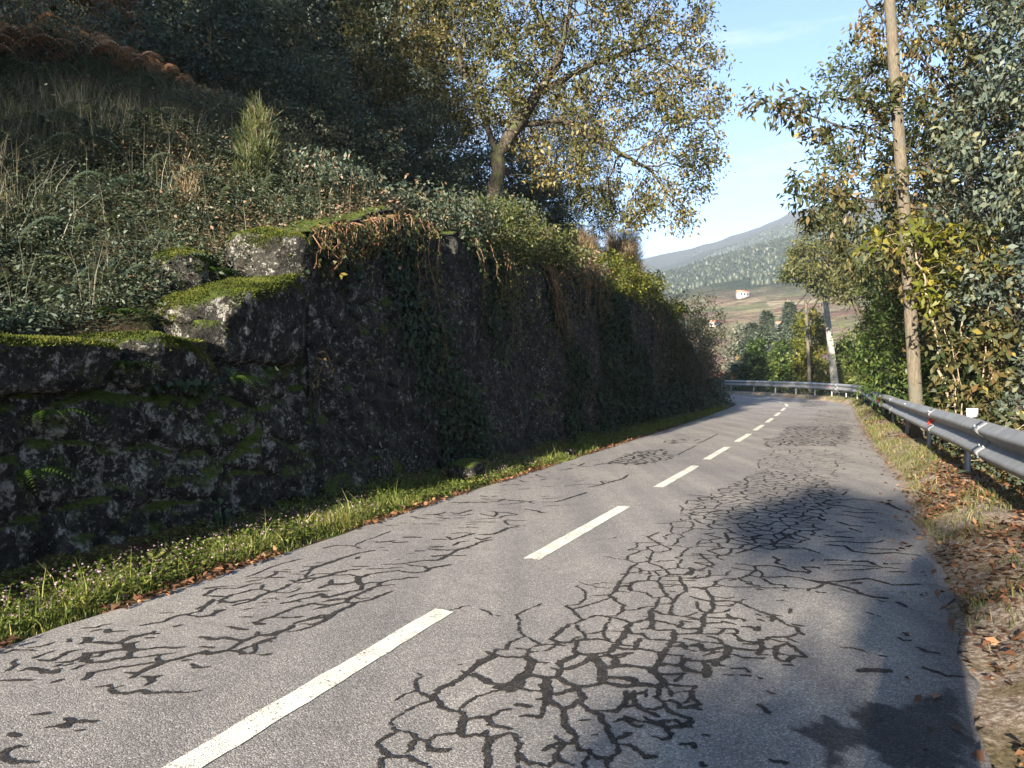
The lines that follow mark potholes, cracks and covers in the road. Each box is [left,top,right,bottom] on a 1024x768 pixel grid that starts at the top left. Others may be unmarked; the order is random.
crack [0,449,921,768]
crack [844,637,968,677]
crack [608,433,717,465]
